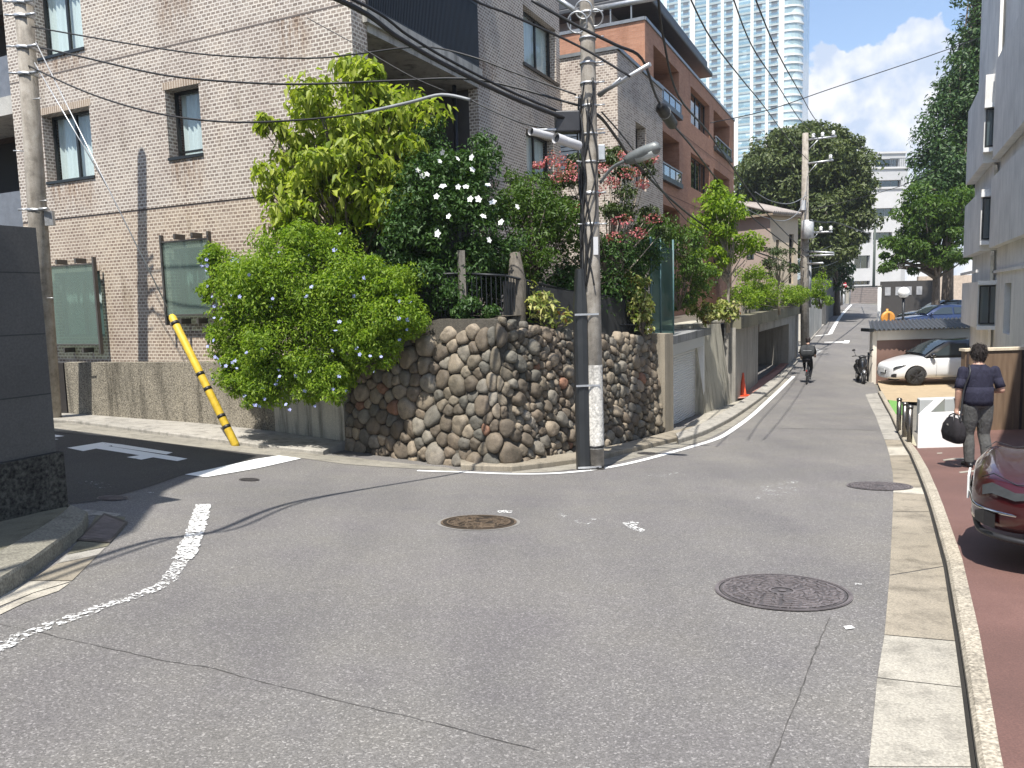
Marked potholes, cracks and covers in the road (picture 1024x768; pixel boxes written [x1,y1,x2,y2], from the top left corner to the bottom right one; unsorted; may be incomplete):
manhole cover [715,574,853,611]
manhole cover [846,481,913,490]
manhole cover [437,515,520,530]
crack [769,616,831,768]
